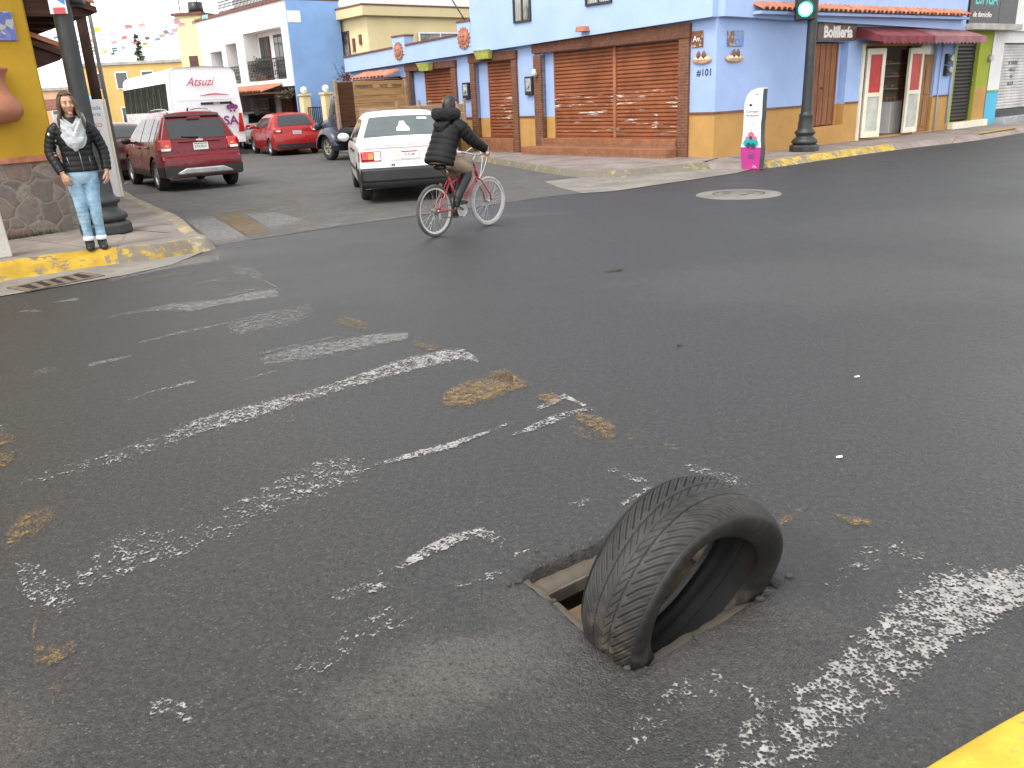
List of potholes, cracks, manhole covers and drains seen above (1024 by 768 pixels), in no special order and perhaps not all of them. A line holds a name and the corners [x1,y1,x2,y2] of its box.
drain grate [7,272,105,292]
manhole cover [696,189,782,200]
pothole [506,538,794,671]
